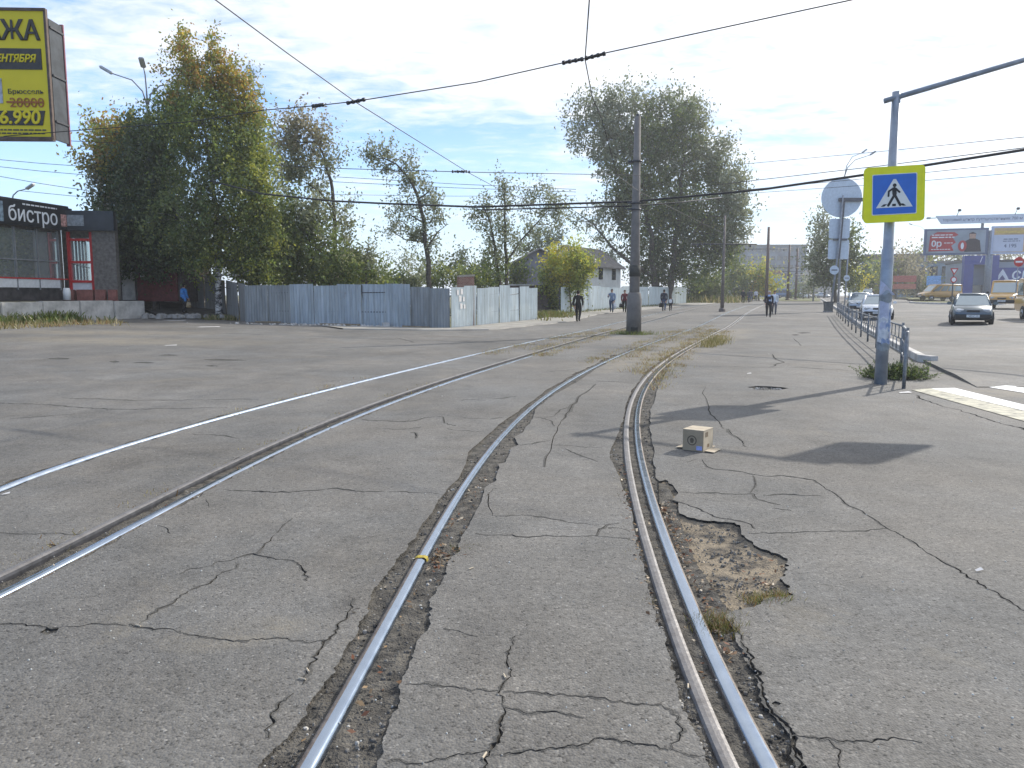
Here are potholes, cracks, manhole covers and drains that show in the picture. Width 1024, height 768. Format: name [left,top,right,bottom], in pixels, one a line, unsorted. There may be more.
crack [362,396,516,438]
pothole [658,480,793,634]
crack [730,617,922,768]
crack [475,489,630,540]
crack [523,369,625,467]
crack [670,389,1024,611]
crack [0,518,356,738]
crack [385,628,707,768]
